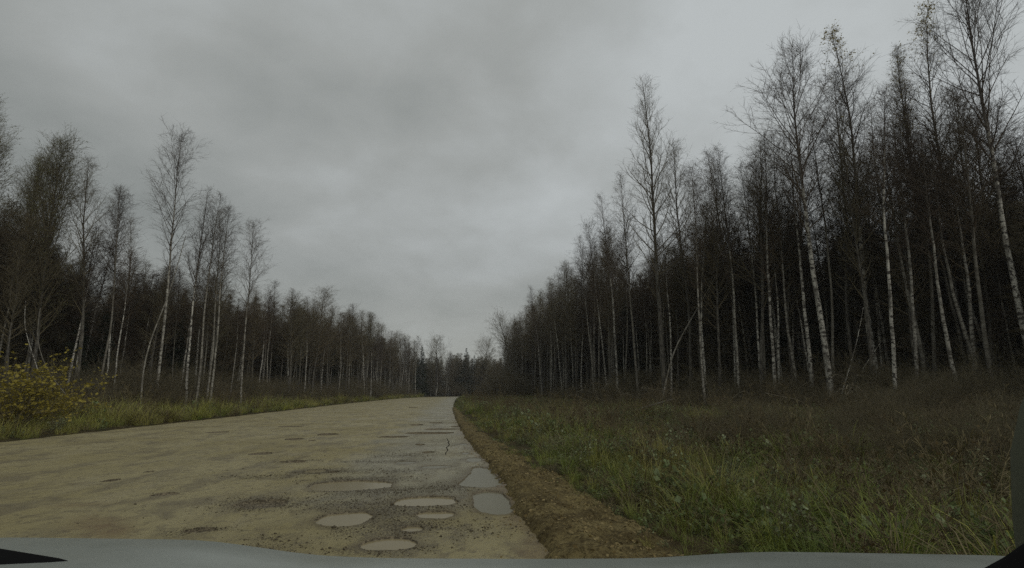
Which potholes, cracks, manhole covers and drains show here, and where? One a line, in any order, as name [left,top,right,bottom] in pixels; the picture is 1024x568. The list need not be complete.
pothole [314,511,375,527]
pothole [393,496,459,506]
pothole [358,536,418,550]
pothole [458,467,503,487]
pothole [471,490,513,515]
pothole [232,499,288,509]
pothole [307,480,393,491]
